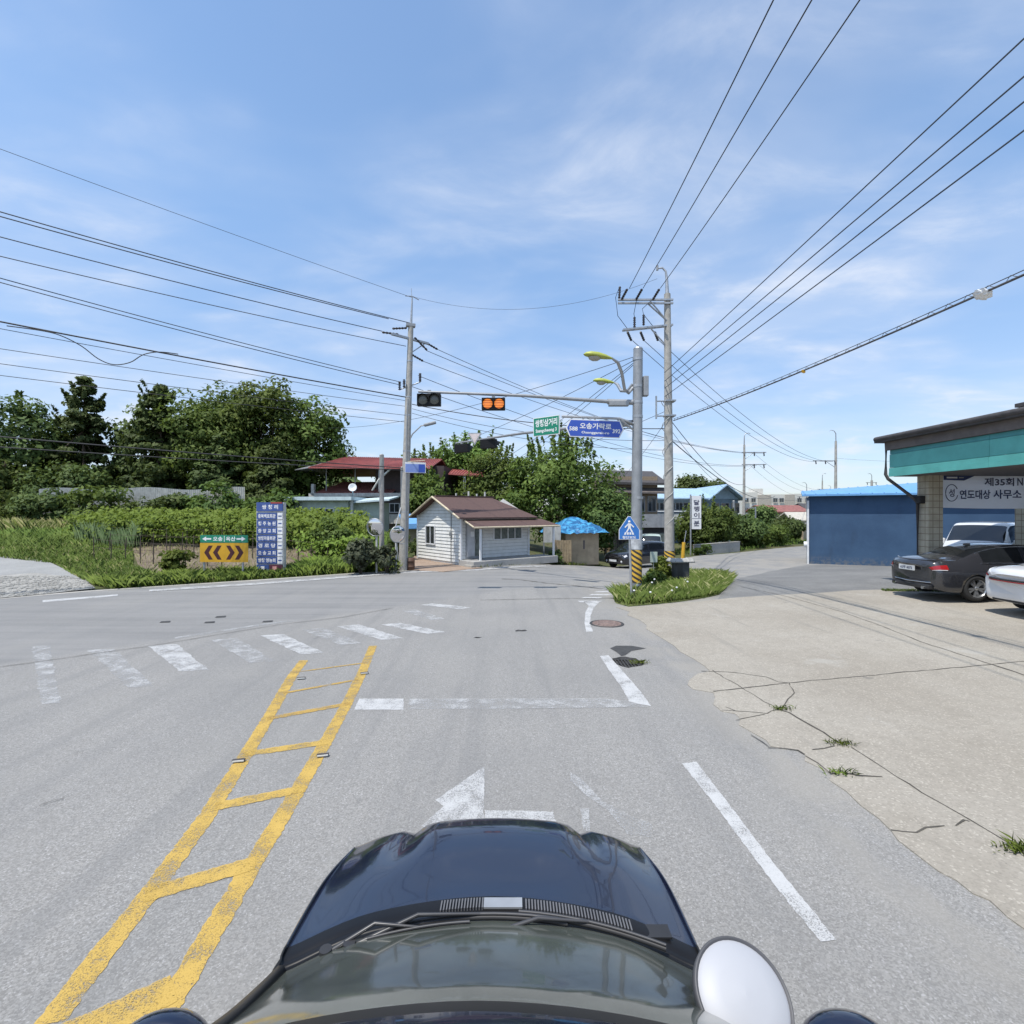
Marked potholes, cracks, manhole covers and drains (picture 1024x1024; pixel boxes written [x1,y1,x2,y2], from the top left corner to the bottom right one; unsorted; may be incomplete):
crack [712,661,1024,853]
drain grate [612,656,644,668]
manhole cover [589,620,624,628]
